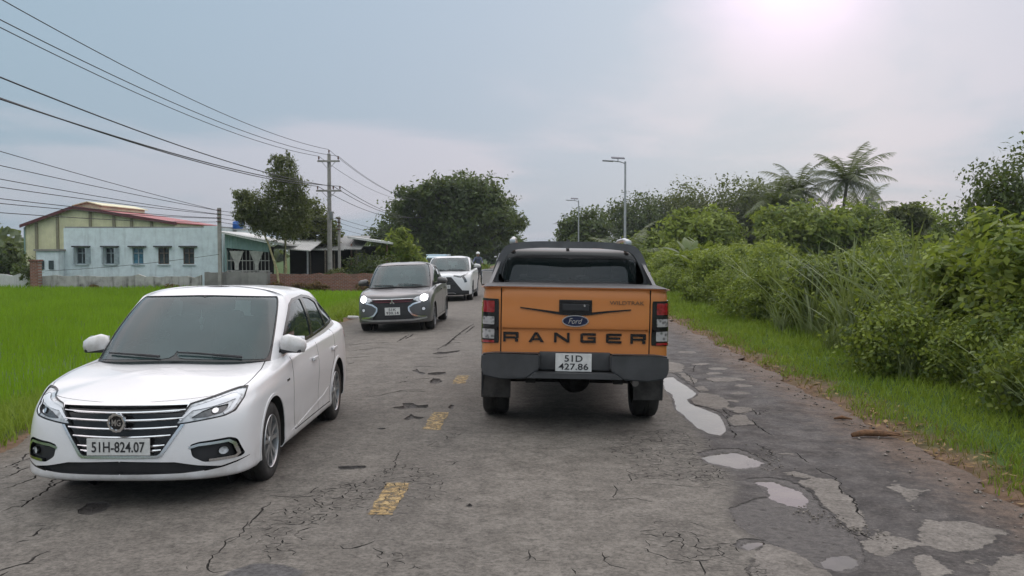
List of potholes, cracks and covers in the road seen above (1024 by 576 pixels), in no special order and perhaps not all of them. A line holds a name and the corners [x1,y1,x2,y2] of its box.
crack [1,453,64,512]
crack [641,516,768,576]
crack [0,525,48,576]
crack [438,324,475,358]
crack [186,427,461,573]
pothole [697,448,768,471]
pothole [663,373,730,436]
pothole [729,477,866,574]
